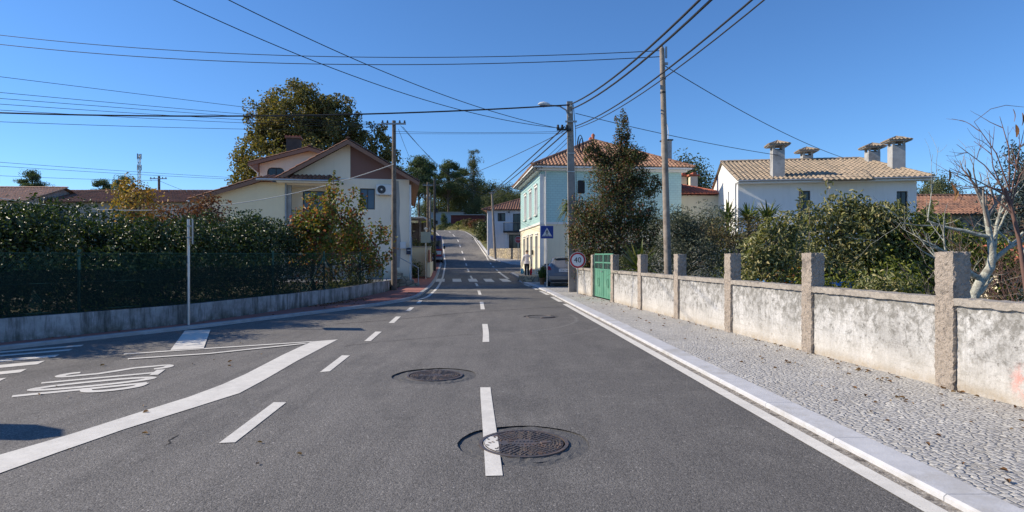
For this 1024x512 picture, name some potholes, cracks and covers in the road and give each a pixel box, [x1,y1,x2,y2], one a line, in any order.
manhole cover [457,426,590,467]
manhole cover [391,368,476,385]
